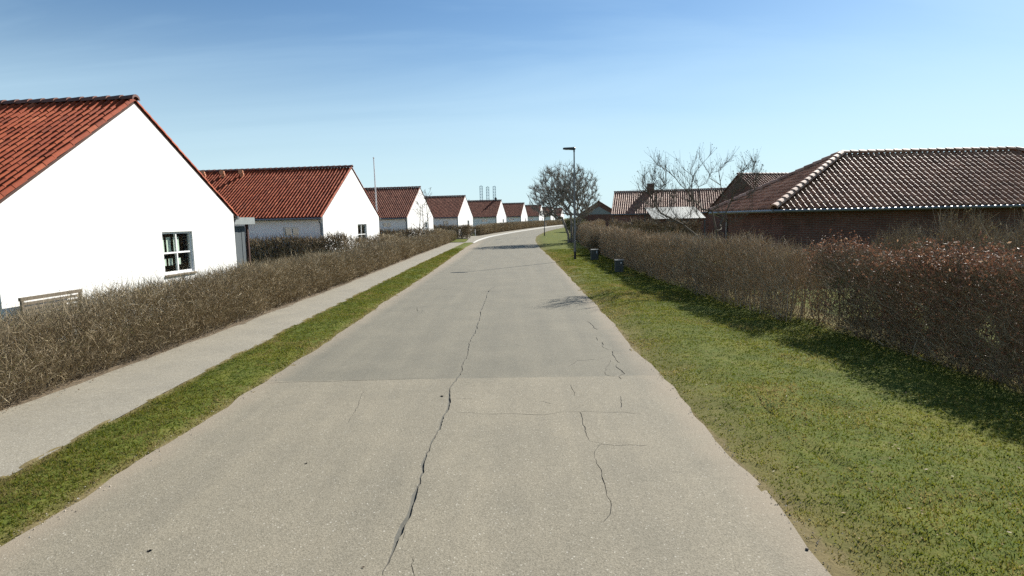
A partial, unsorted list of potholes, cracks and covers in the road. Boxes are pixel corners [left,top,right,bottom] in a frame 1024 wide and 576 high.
crack [261,287,645,575]
